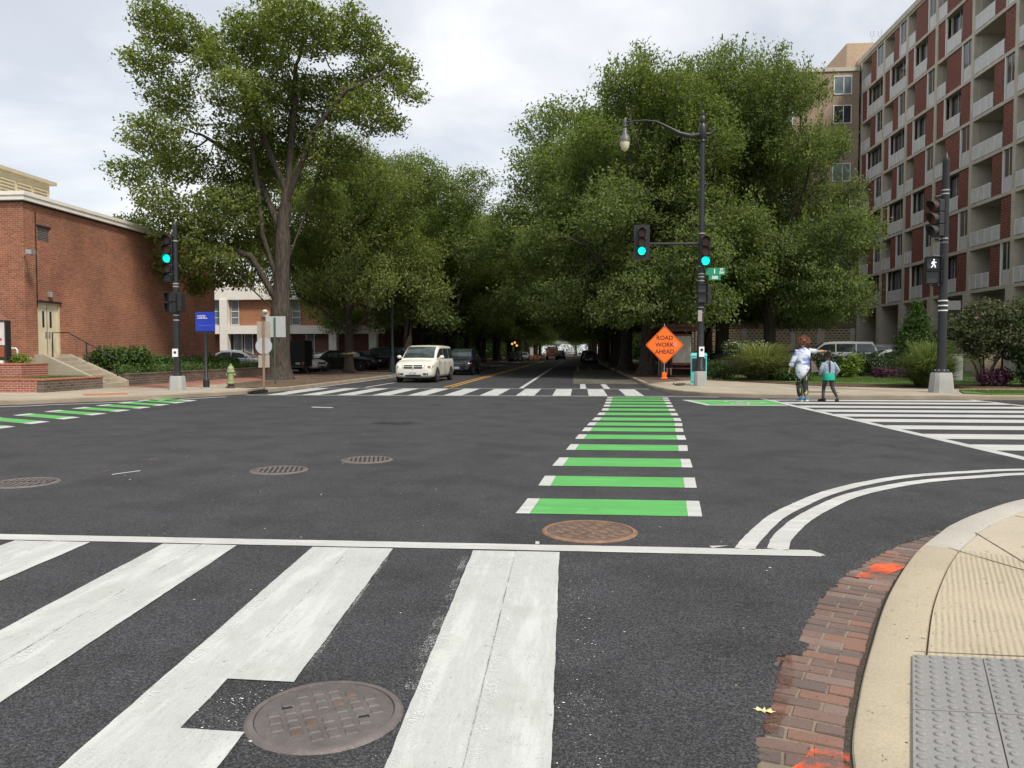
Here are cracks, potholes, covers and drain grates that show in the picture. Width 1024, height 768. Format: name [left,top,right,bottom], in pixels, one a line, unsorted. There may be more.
manhole cover [250,465,308,475]
manhole cover [542,520,638,543]
manhole cover [0,477,62,489]
manhole cover [243,681,403,755]
manhole cover [341,456,393,464]
